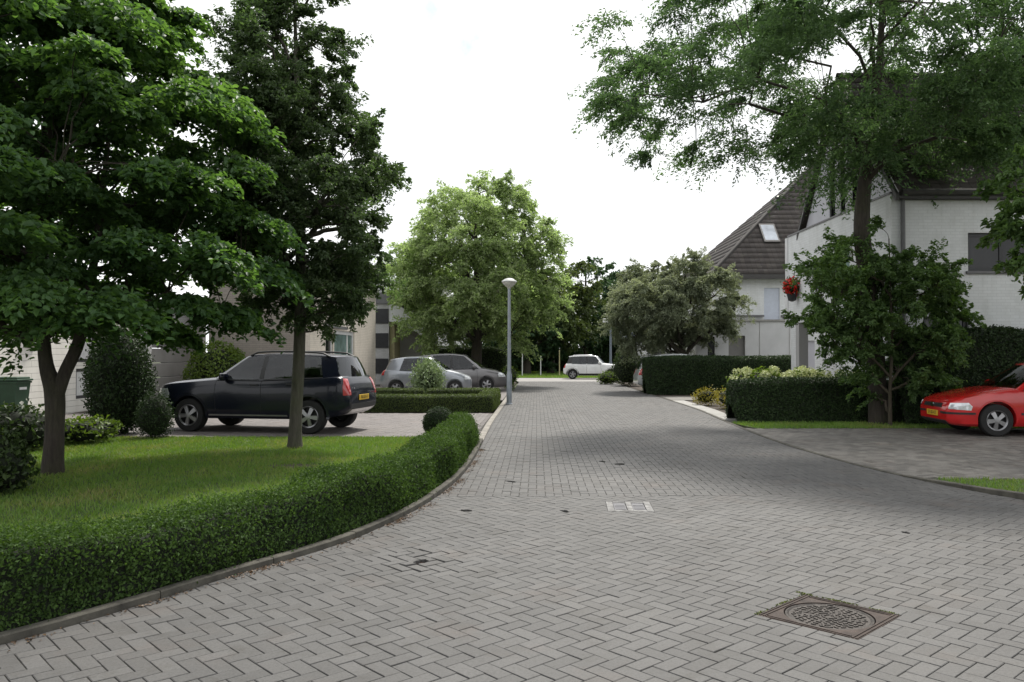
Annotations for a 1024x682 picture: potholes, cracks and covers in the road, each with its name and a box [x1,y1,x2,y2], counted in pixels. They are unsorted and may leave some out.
manhole cover [758,594,900,640]
manhole cover [606,501,654,512]
